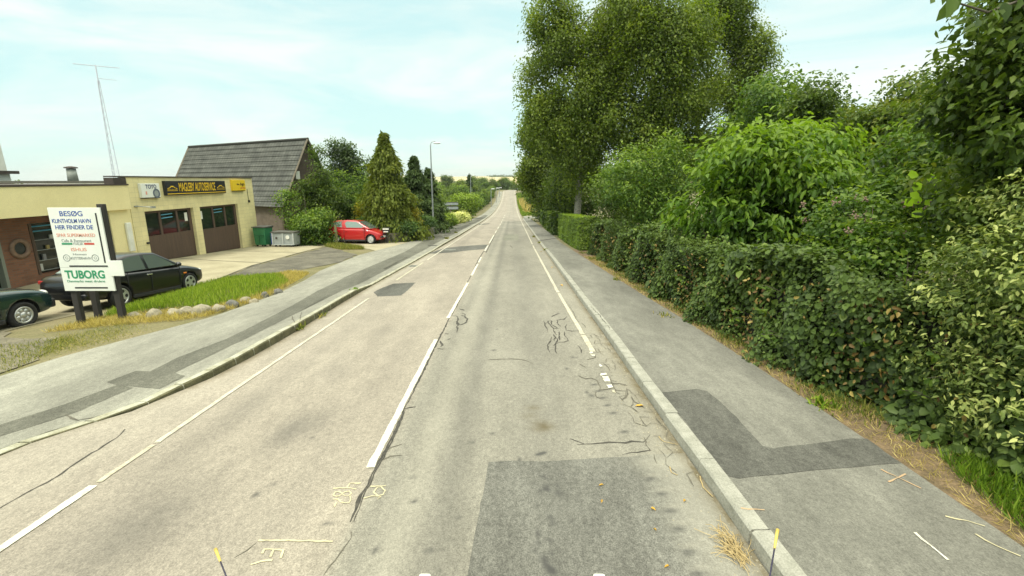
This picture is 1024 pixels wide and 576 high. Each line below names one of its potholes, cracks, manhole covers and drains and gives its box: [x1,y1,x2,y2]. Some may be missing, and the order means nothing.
crack [489,307,694,486]
crack [0,414,125,508]
crack [324,232,513,574]
